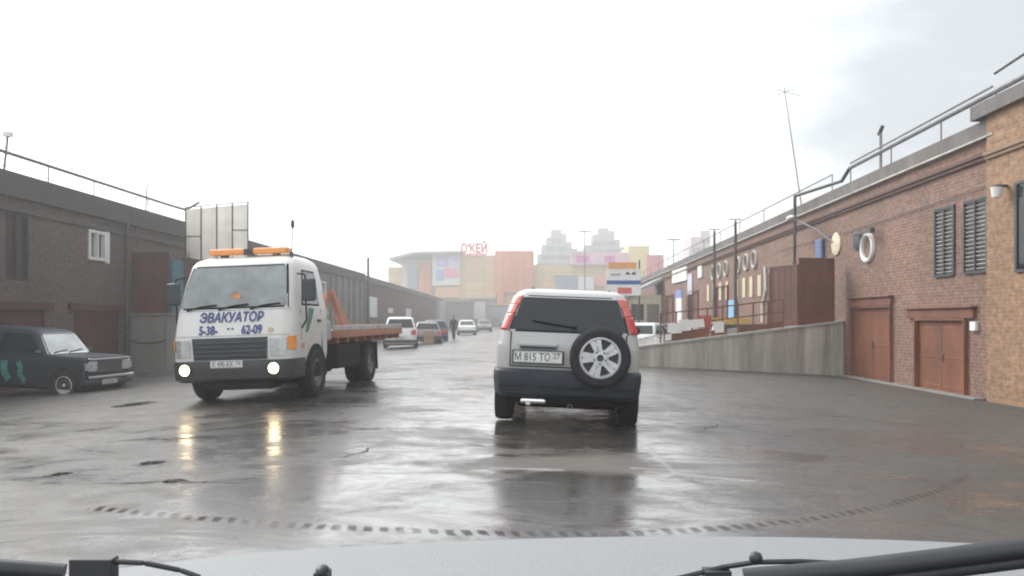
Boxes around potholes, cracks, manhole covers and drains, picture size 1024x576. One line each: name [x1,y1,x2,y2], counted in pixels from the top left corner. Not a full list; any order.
crack [334,427,378,458]
